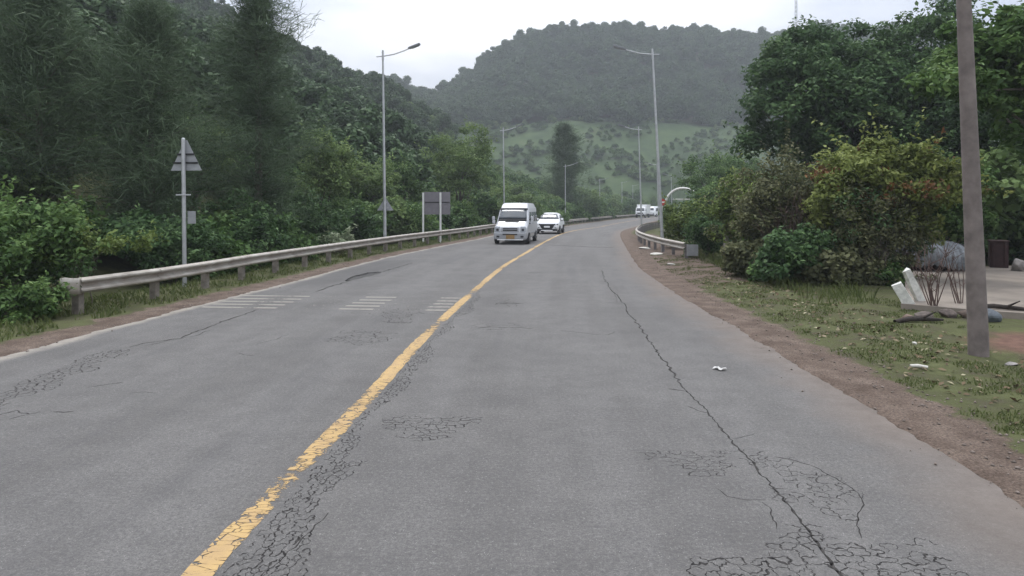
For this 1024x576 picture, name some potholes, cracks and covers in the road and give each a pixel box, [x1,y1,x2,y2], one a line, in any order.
crack [572,272,969,576]
crack [222,291,532,576]
